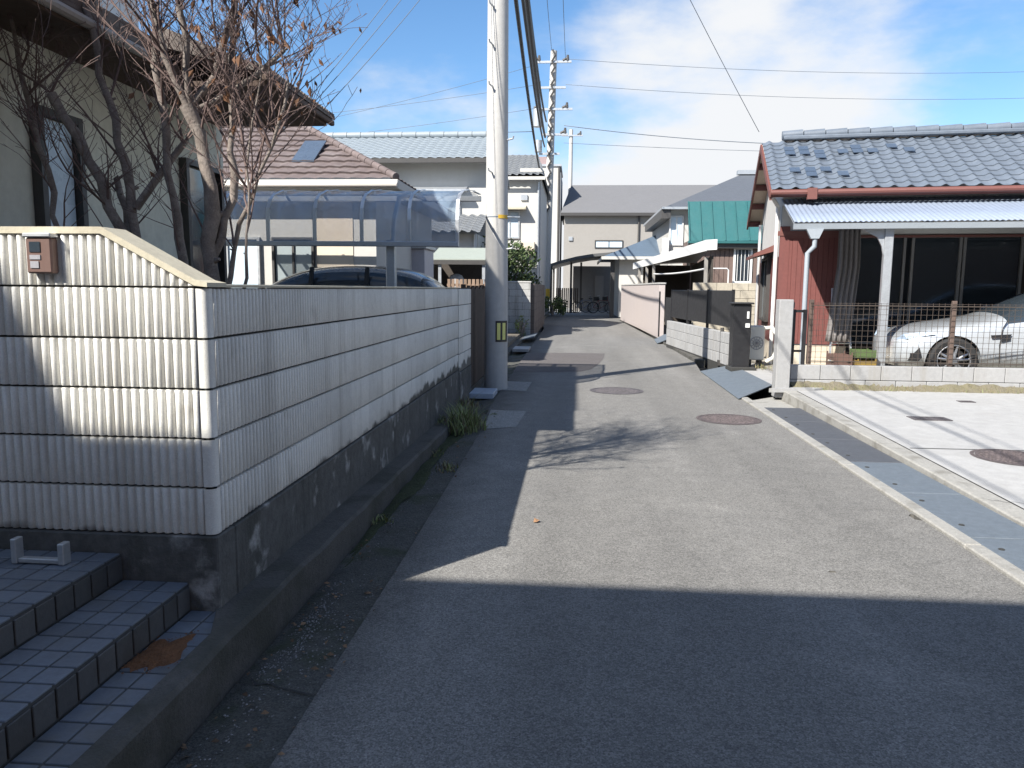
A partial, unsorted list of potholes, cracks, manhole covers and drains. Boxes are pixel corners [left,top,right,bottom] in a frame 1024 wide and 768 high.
crack [251,678,313,695]
manhole cover [970,449,1024,466]
manhole cover [696,414,762,425]
